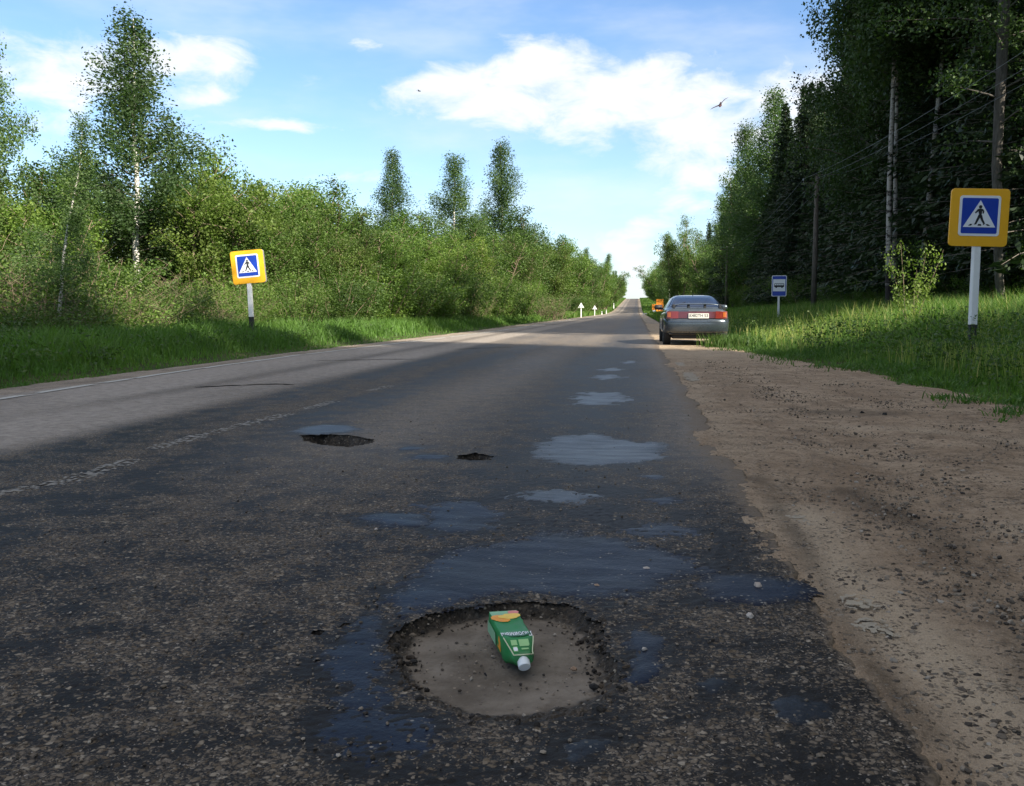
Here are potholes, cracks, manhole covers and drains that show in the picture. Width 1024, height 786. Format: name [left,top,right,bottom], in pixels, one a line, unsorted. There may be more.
pothole [457,452,495,461]
pothole [300,434,375,447]
pothole [386,601,621,723]
